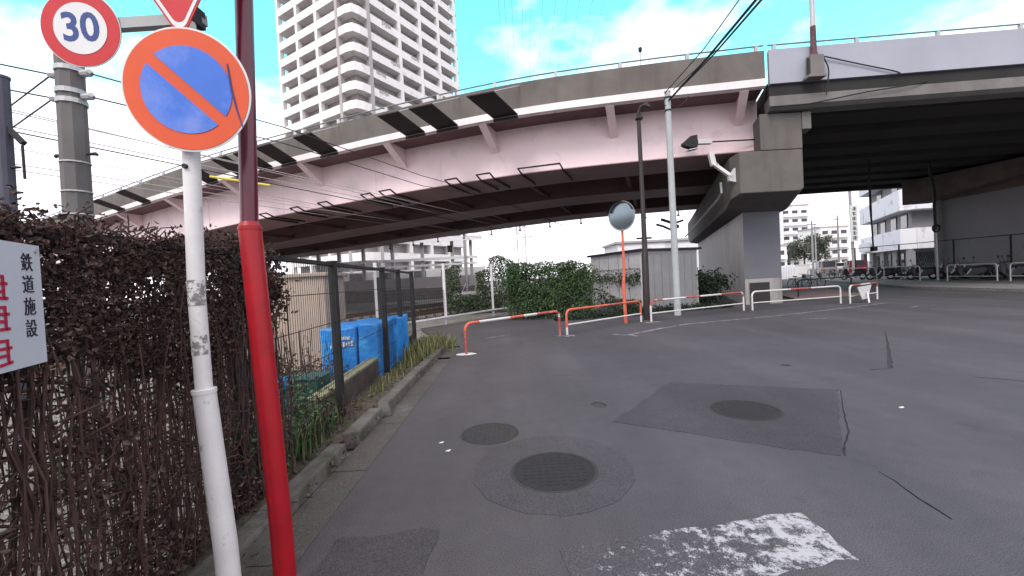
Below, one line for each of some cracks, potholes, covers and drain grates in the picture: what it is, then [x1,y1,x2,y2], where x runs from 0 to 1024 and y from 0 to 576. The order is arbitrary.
crack [880,472,952,519]
manhole cover [461,423,519,445]
crack [870,333,893,370]
crack [840,390,850,456]
manhole cover [709,400,785,421]
manhole cover [511,452,599,493]
